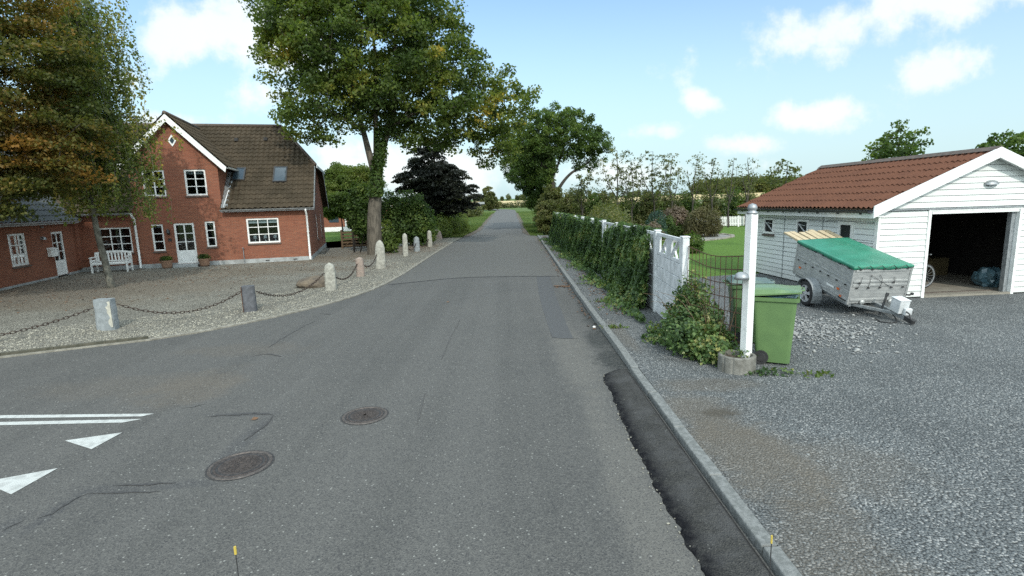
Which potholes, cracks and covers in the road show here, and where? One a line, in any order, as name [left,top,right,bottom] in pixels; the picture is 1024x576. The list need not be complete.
manhole cover [340,406,389,425]
manhole cover [205,450,275,481]
